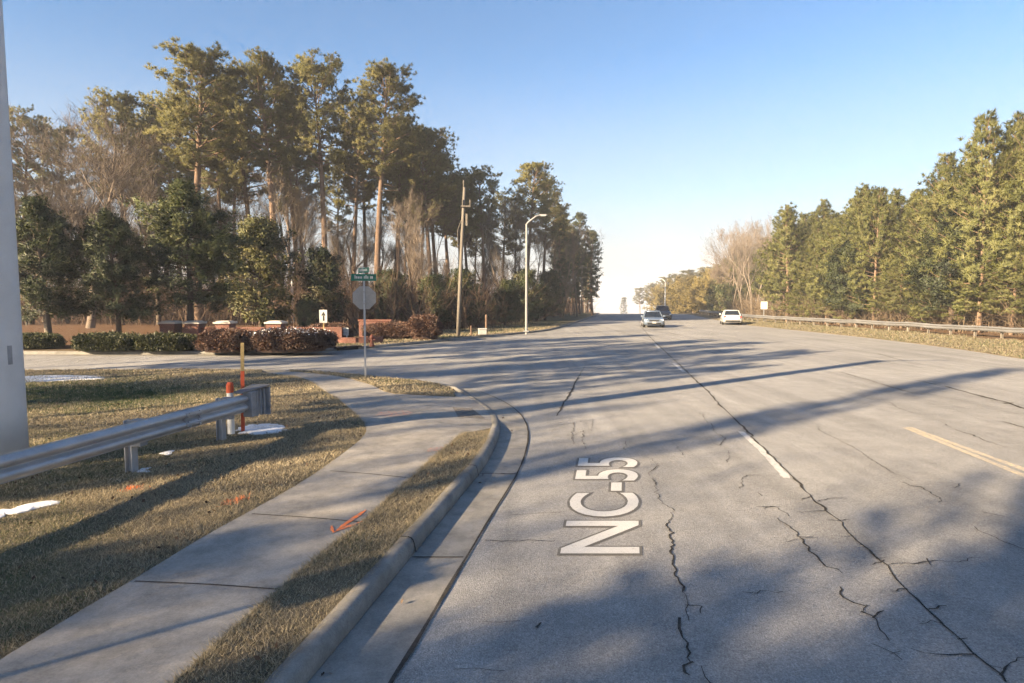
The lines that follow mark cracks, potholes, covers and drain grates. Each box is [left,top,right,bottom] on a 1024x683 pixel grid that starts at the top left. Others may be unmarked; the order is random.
crack [623,441,711,683]
crack [639,325,1023,682]
crack [556,371,593,444]
